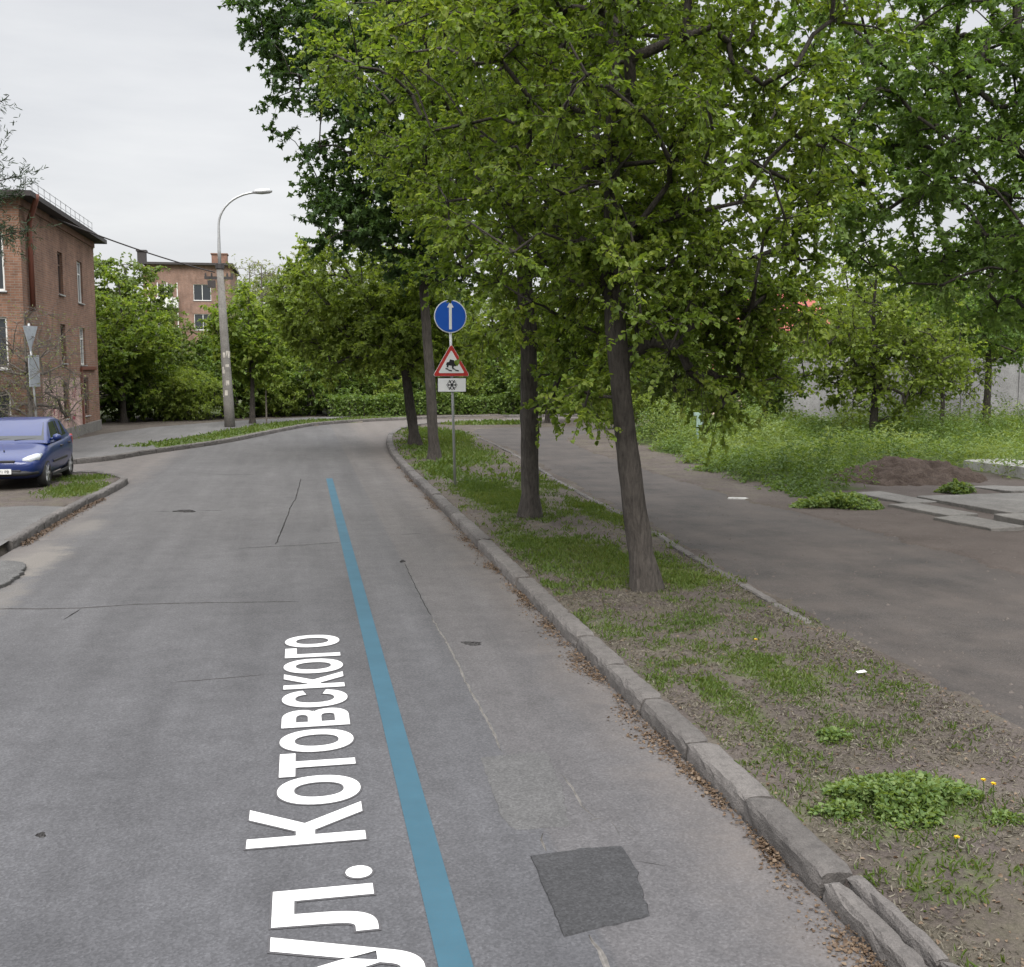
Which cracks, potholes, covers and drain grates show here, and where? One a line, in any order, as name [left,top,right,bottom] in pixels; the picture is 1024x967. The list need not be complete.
crack [250,480,338,548]
